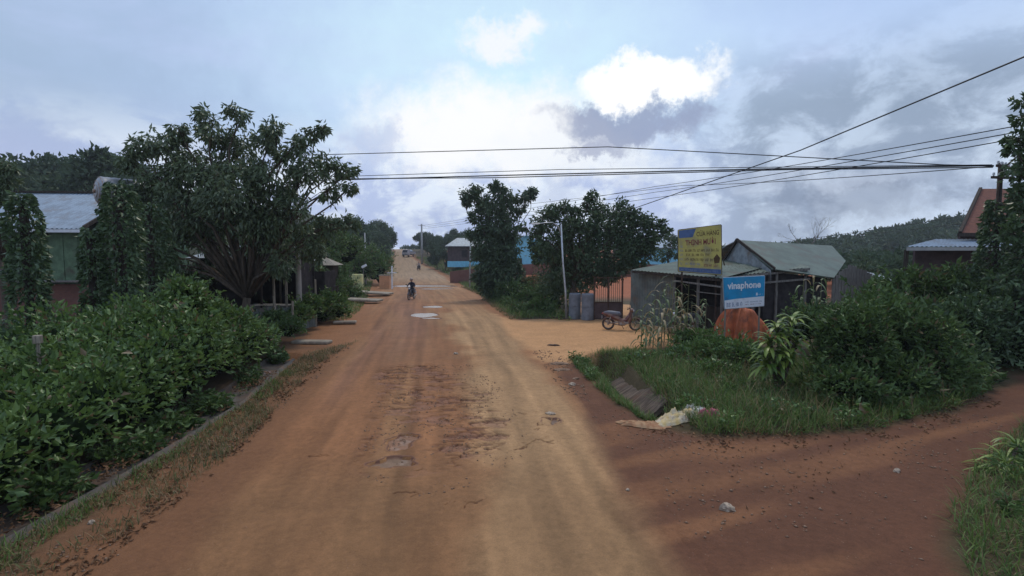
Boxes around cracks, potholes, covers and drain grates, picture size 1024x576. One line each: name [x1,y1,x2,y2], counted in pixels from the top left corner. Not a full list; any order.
pothole [381,432,423,453]
pothole [362,455,421,470]
pothole [538,417,564,427]
crack [298,361,564,513]
